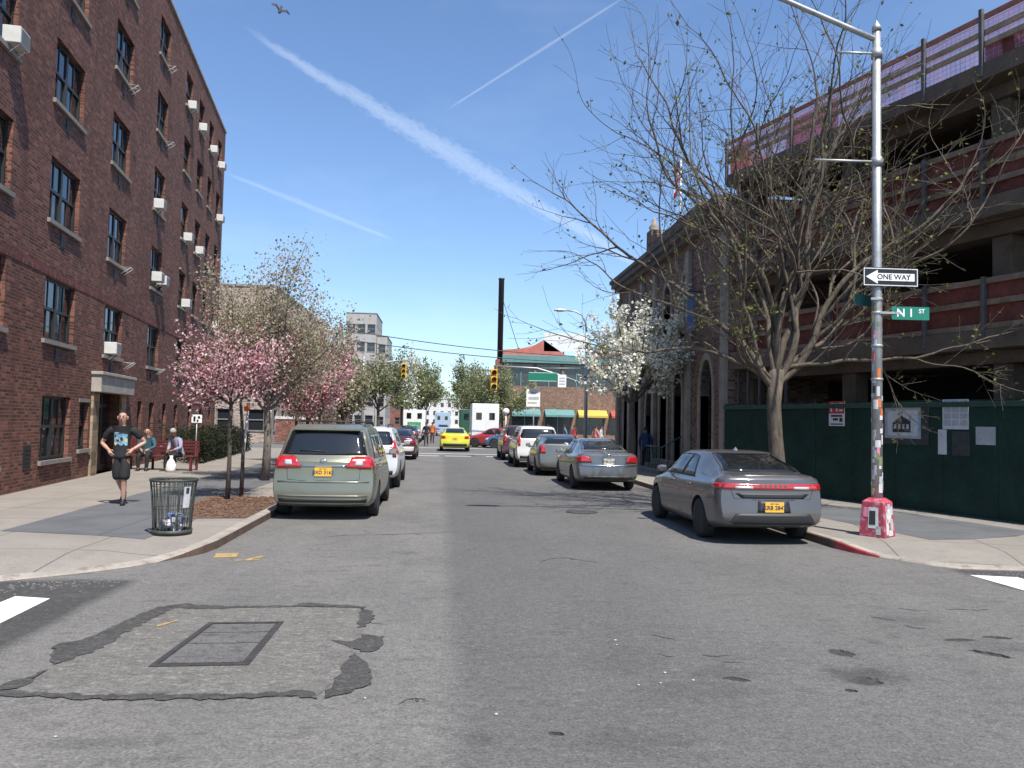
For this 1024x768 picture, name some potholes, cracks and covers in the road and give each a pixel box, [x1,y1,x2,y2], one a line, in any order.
manhole cover [149,621,284,666]
pothole [848,676,884,686]
pothole [967,650,1015,659]
pothole [829,649,855,657]
